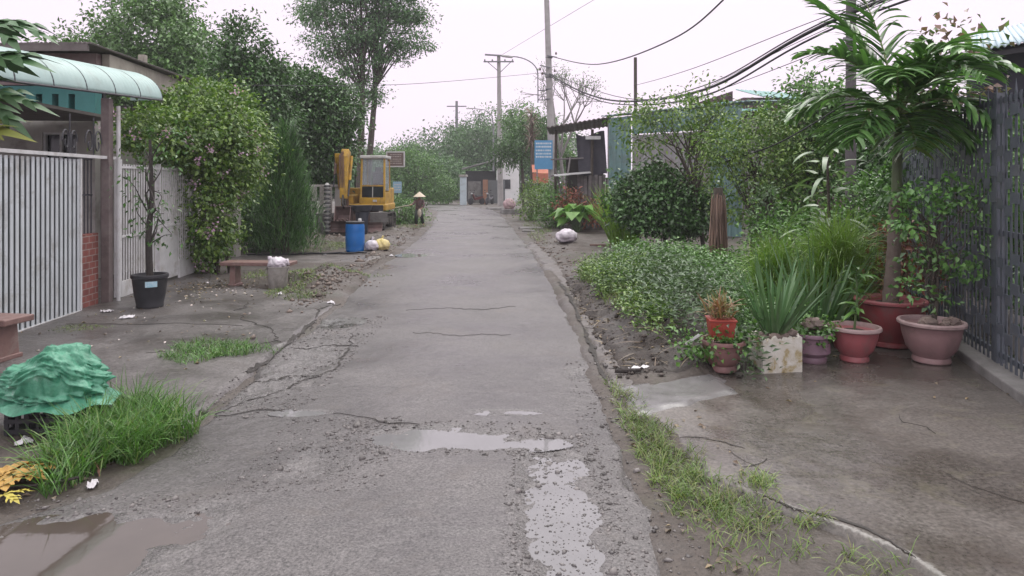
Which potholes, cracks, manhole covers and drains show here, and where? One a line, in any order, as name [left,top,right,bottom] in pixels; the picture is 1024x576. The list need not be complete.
pothole [360,426,573,452]
pothole [0,501,251,576]
pothole [505,449,615,576]
crack [341,413,416,424]
crack [148,303,354,417]
